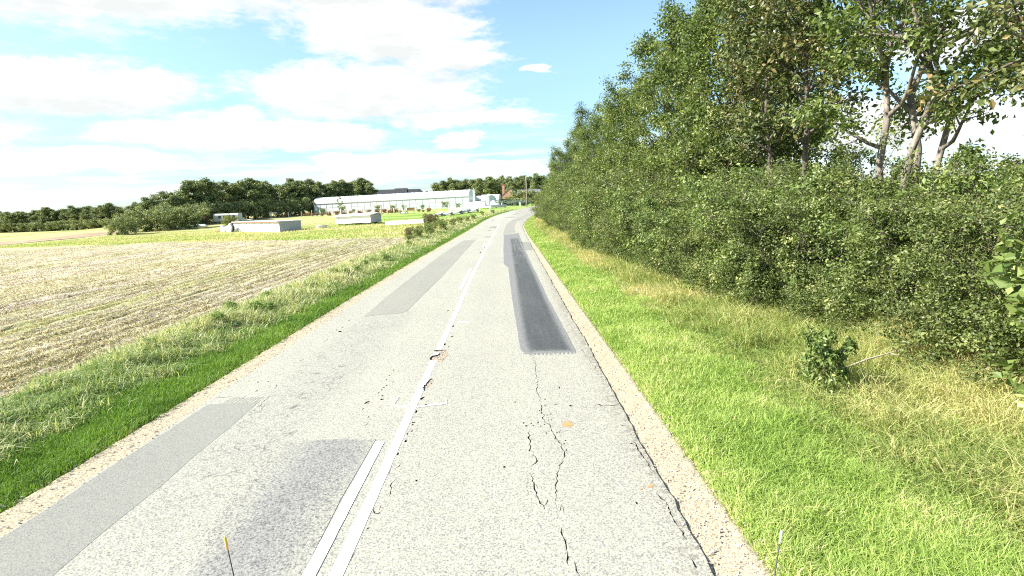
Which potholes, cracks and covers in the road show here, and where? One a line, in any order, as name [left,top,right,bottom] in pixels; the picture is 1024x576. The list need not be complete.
crack [658,495,687,540]
pothole [430,350,448,362]
crack [526,357,580,576]
